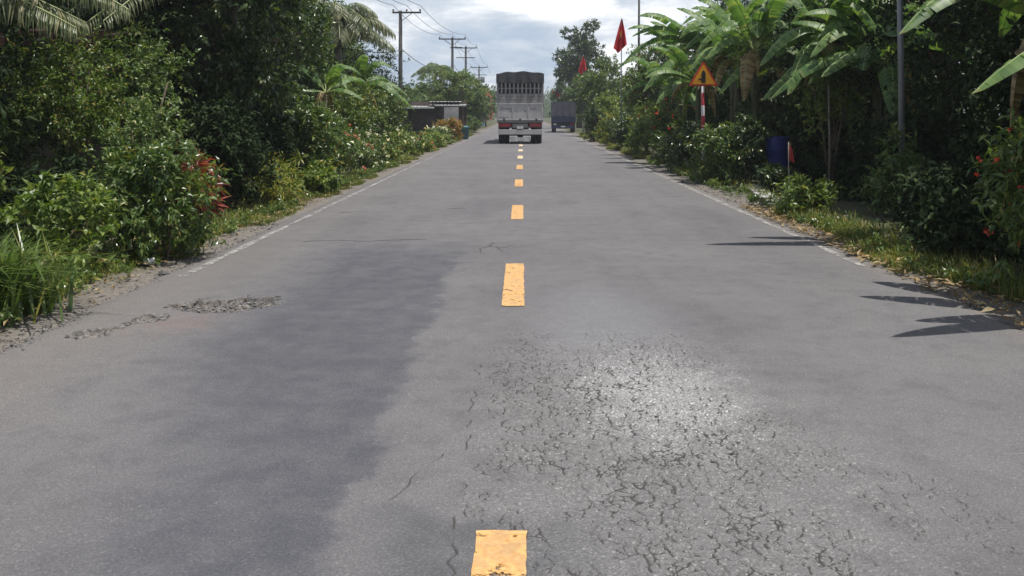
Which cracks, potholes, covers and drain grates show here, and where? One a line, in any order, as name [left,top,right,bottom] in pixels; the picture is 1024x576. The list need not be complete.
pothole [64,312,170,340]
pothole [163,295,282,313]
crack [393,332,1017,576]
